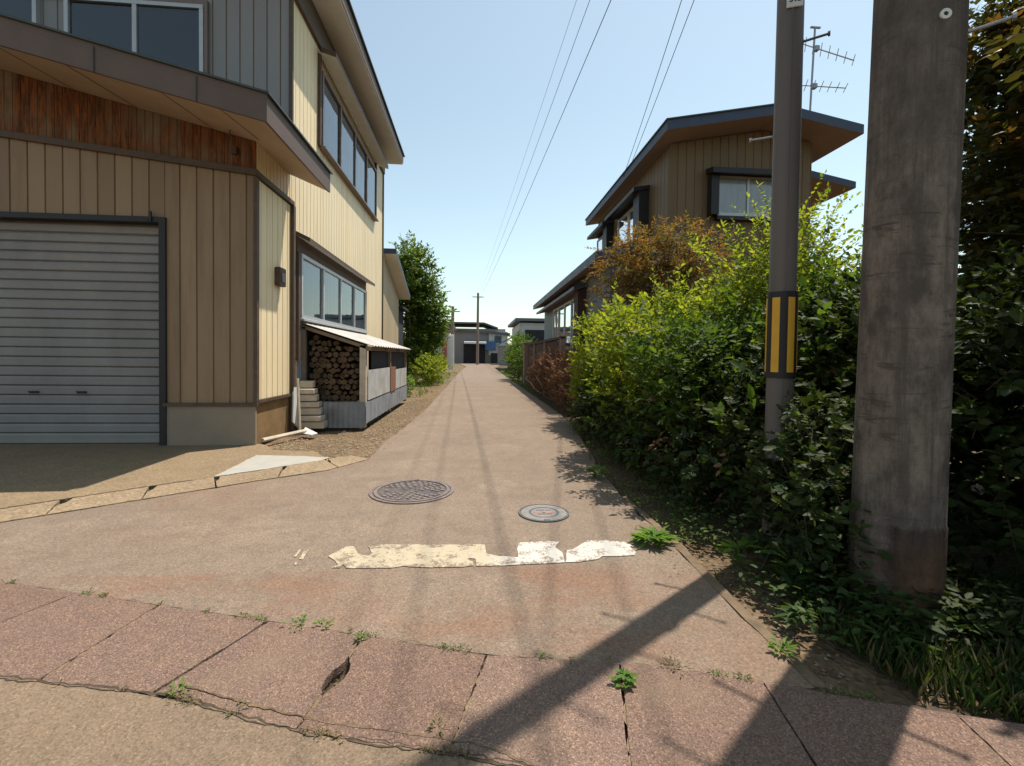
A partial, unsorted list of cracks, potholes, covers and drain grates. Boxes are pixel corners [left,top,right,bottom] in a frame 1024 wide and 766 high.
manhole cover [369,479,454,505]
crack [0,579,964,766]
pothole [322,660,350,697]
manhole cover [518,504,569,523]
